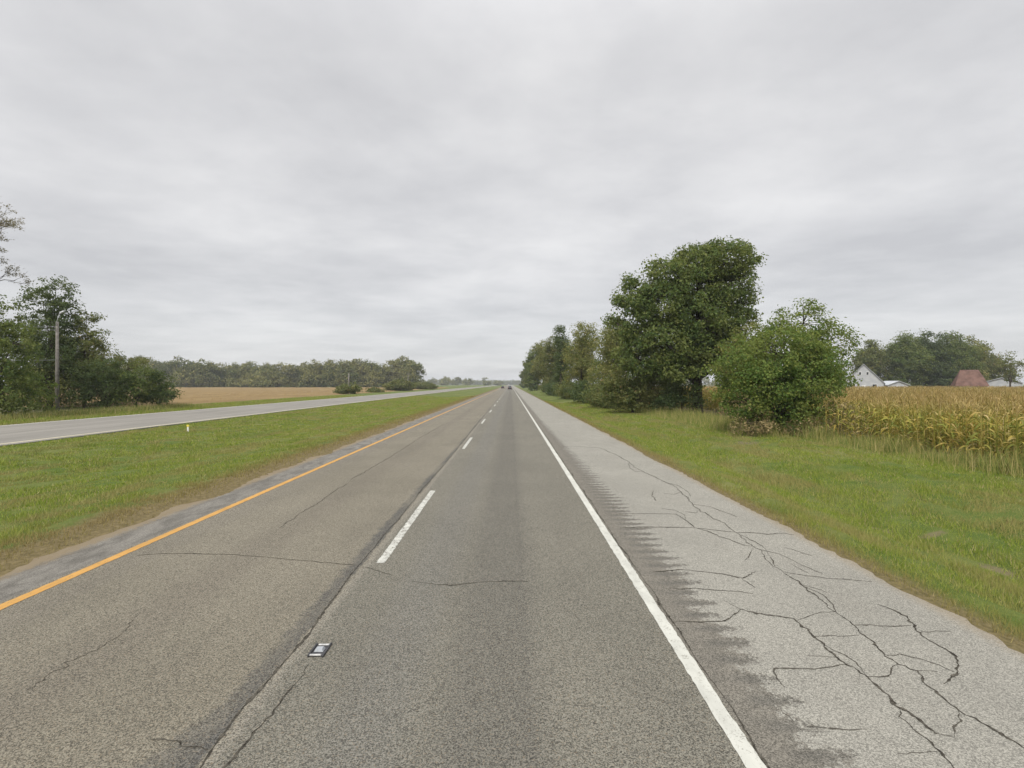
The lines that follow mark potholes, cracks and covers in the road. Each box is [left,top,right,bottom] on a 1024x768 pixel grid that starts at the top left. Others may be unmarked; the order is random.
crack [281,427,438,527]
crack [27,614,139,690]
crack [144,553,391,575]
crack [152,668,306,768]
crack [575,446,1024,768]
